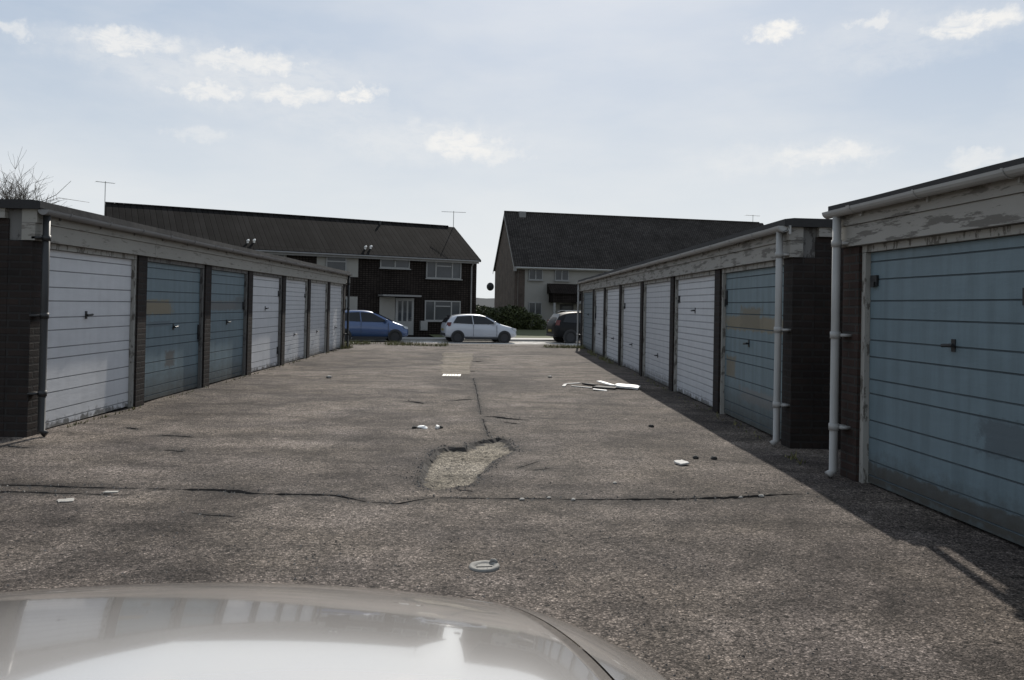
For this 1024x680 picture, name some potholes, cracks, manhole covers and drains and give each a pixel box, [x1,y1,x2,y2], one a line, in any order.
crack [456,361,521,437]
pothole [420,438,516,490]
